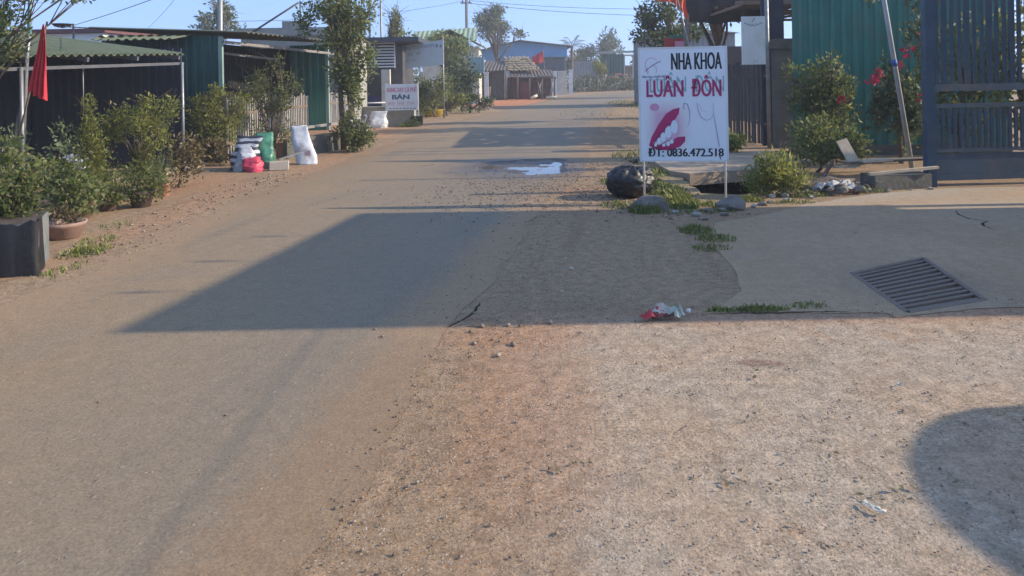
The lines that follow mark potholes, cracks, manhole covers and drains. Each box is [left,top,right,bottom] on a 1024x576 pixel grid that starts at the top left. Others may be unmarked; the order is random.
drain grate [850,257,988,313]
crack [445,303,480,328]
pothole [463,158,569,175]
